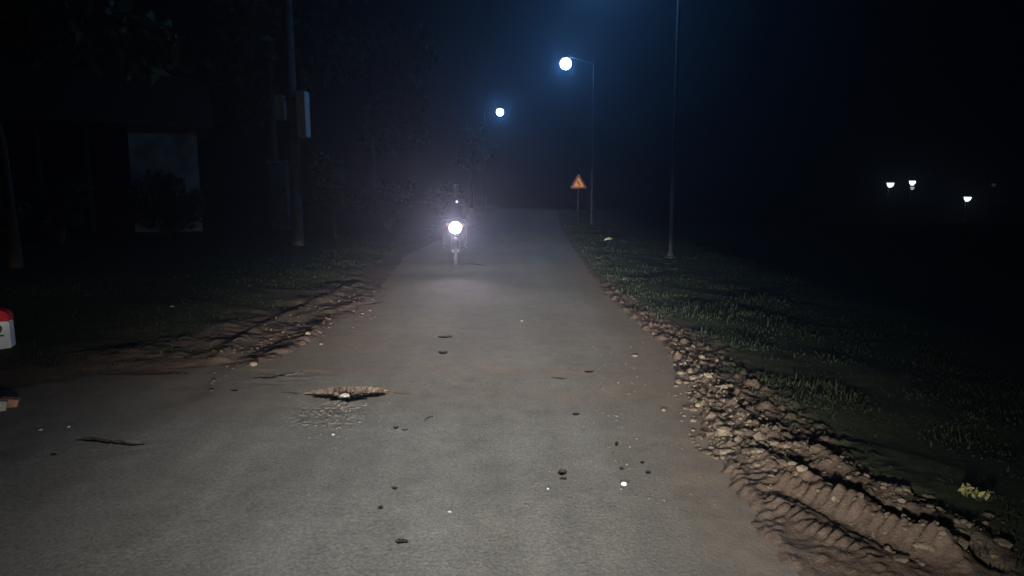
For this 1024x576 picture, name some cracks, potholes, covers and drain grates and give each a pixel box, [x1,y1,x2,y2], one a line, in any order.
crack [75,437,145,446]
crack [254,370,303,394]
pothole [303,386,390,403]
